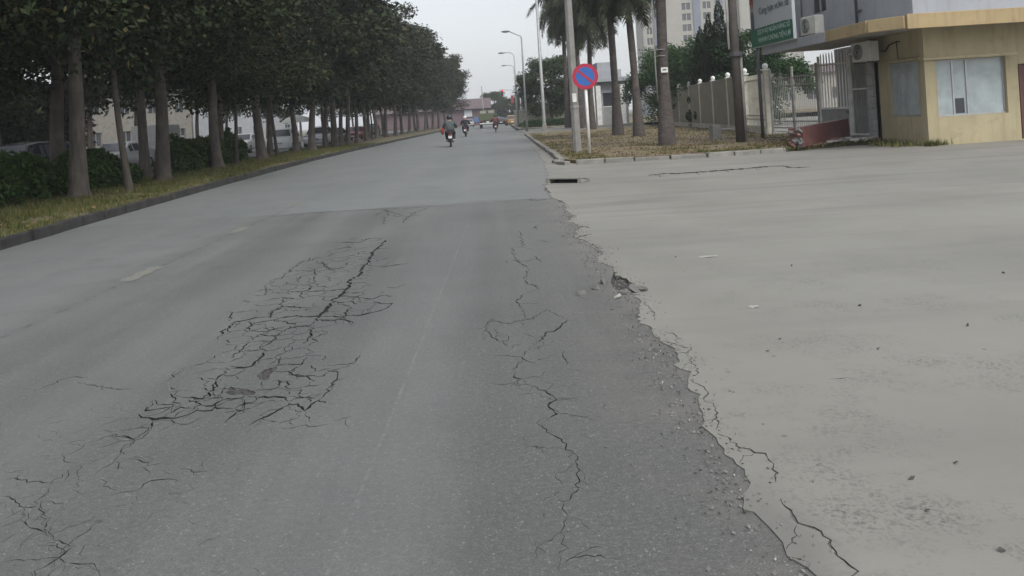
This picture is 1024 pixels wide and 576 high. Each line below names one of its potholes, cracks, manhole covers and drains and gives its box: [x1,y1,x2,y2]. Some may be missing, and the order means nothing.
crack [0,238,402,576]
pothole [611,273,632,290]
drain grate [542,177,590,185]
crack [640,297,778,482]
crack [781,500,859,576]
crack [480,222,620,571]
